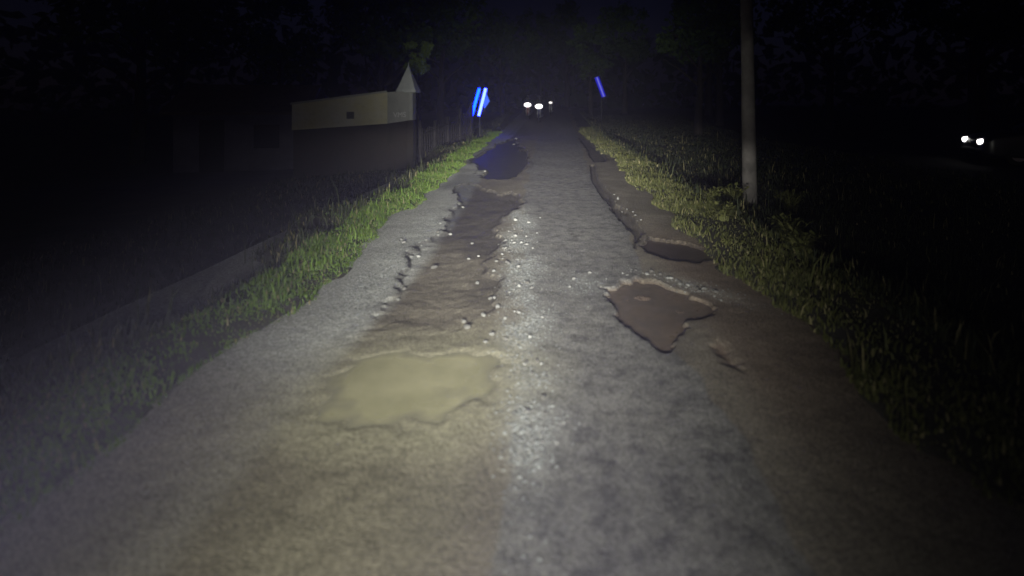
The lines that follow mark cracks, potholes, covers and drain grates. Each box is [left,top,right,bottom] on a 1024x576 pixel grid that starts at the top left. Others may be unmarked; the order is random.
pothole [342,182,527,345]
pothole [701,337,753,376]
pothole [467,138,535,180]
pothole [597,275,718,354]
pothole [638,235,713,263]
pothole [308,346,520,444]
